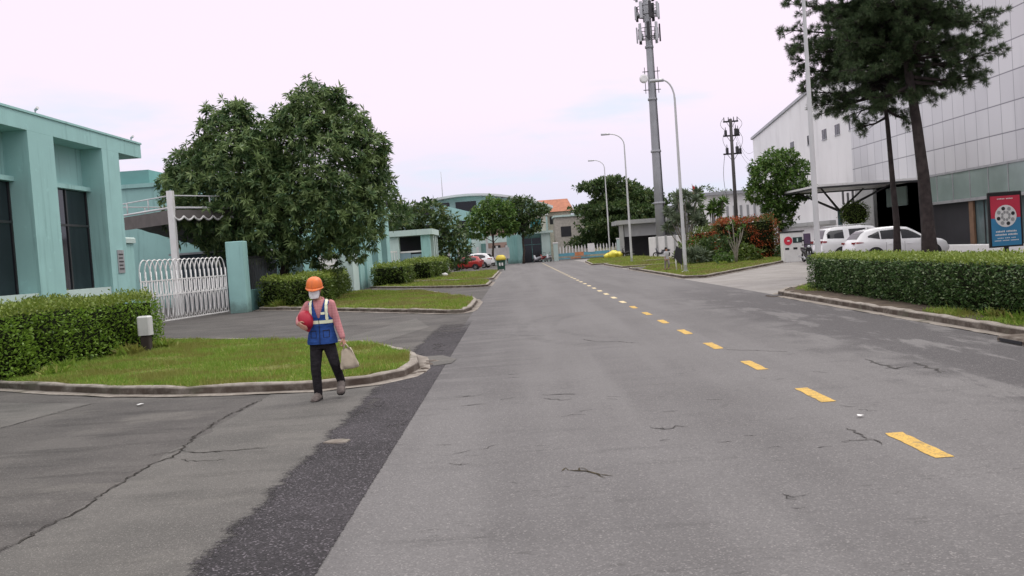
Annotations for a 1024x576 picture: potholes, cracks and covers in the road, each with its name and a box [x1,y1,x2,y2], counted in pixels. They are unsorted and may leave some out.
crack [562,467,612,477]
crack [866,359,945,373]
